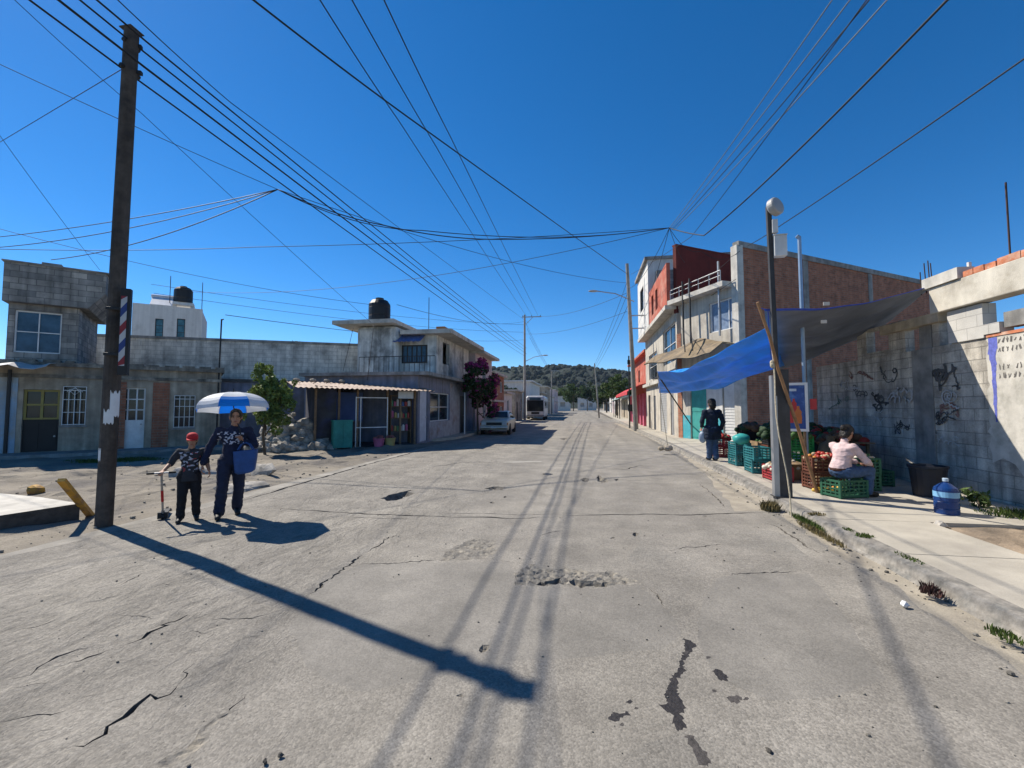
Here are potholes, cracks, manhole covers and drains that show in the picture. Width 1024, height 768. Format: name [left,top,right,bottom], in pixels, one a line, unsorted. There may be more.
crack [8,612,272,747]
pothole [513,564,641,588]
pothole [380,490,414,501]
